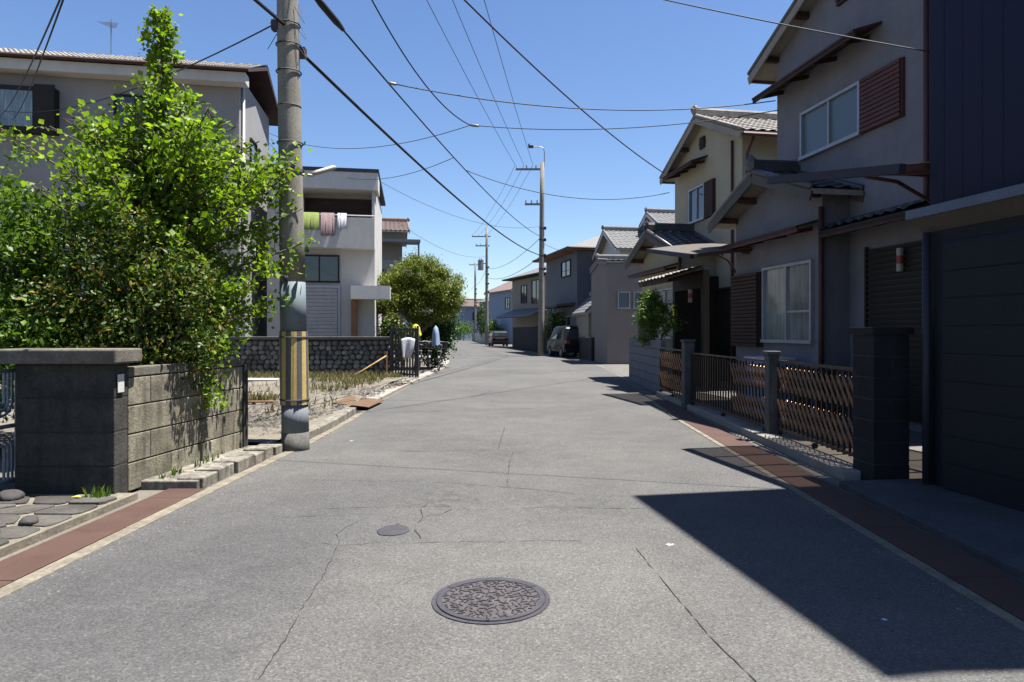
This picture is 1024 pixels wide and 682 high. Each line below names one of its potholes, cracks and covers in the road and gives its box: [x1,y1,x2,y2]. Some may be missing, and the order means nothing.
utility cover [377,523,410,536]
manhole cover [432,577,550,625]
crack [636,548,757,682]
crack [258,427,609,679]
